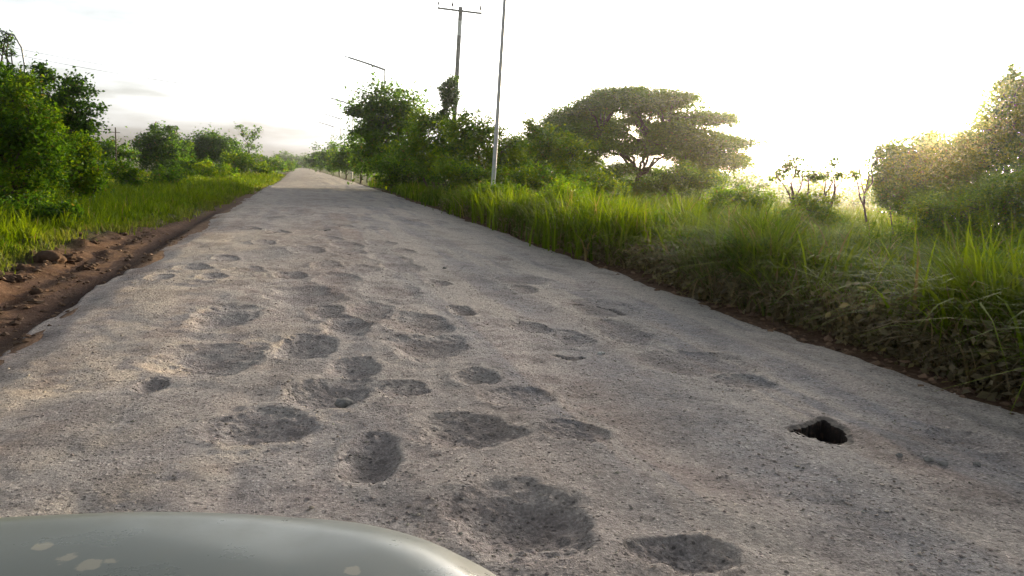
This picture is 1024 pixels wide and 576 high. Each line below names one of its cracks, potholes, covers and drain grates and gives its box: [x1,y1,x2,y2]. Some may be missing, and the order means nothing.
pothole [420,412,524,449]
pothole [453,368,500,385]
pothole [146,342,271,379]
pothole [337,432,400,485]
pothole [131,375,168,393]
pothole [200,407,316,447]
pothole [445,479,594,564]
pothole [282,378,384,410]
pothole [383,333,469,362]
pothole [785,416,854,445]
pothole [328,357,380,380]
pothole [267,334,336,360]
